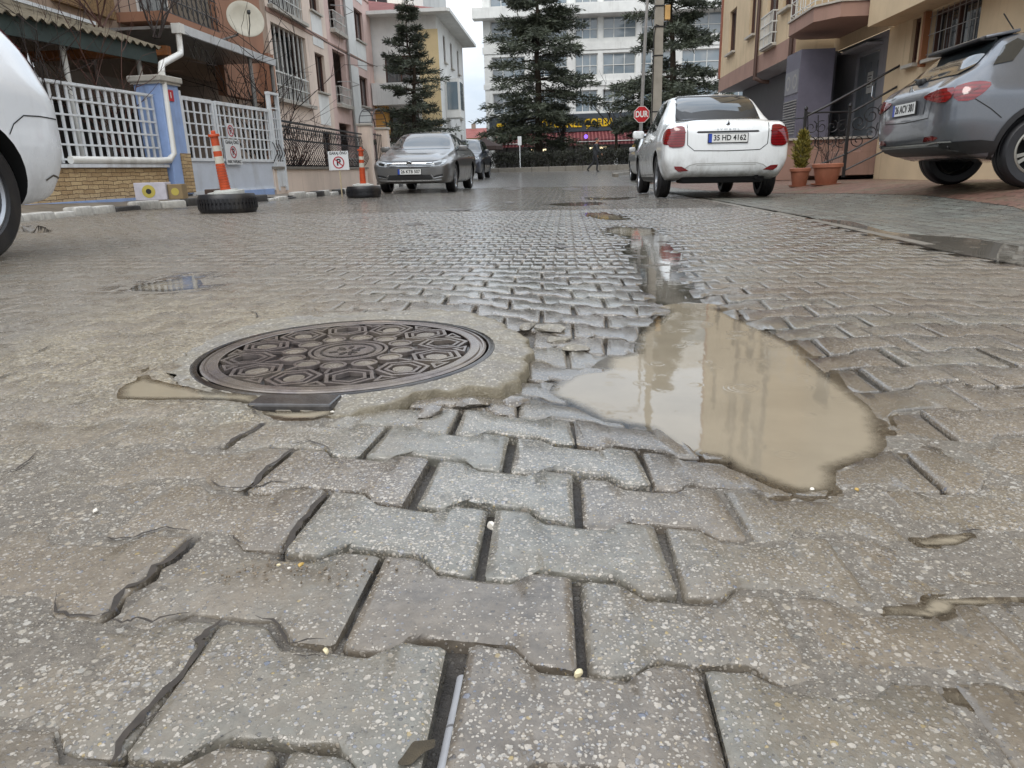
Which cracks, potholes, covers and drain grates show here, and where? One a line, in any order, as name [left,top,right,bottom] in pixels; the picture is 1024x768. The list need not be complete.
crack [54,526,223,765]
manhole cover [189,320,495,413]
pothole [618,235,695,305]
pothole [553,303,876,489]
pothole [135,279,193,290]
pothole [585,212,632,220]
crack [255,615,324,657]
pothole [594,226,663,237]
pothole [892,600,986,616]
pothole [123,379,252,401]
pothole [921,536,966,544]
crack [192,407,330,554]
